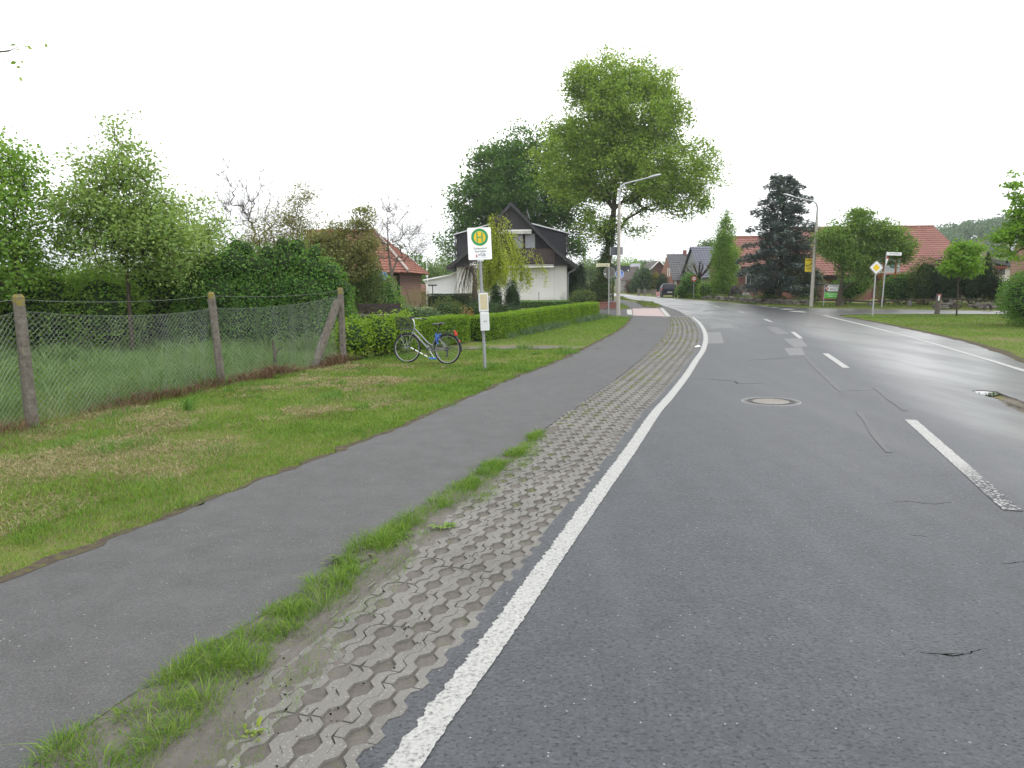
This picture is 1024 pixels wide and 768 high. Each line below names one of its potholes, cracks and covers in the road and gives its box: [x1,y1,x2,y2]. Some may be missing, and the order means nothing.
manhole cover [741,397,801,406]
crack [920,649,982,657]
